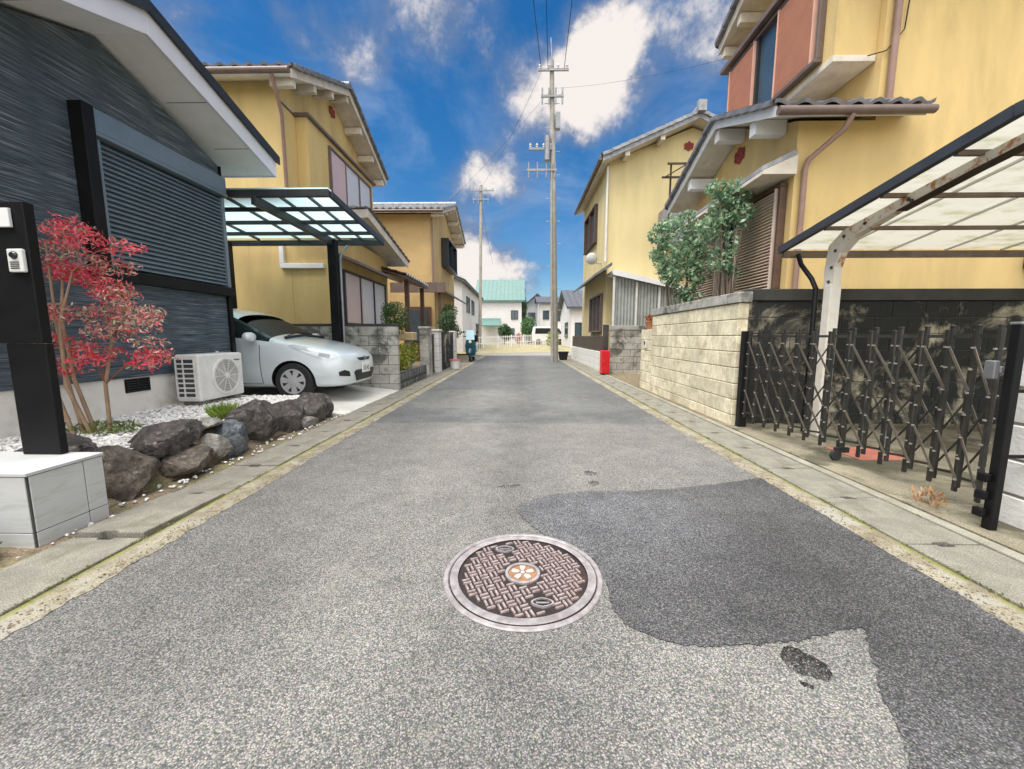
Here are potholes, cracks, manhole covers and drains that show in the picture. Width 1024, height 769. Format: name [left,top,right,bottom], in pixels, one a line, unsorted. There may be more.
pothole [780,645,833,689]
manhole cover [443,534,603,633]
